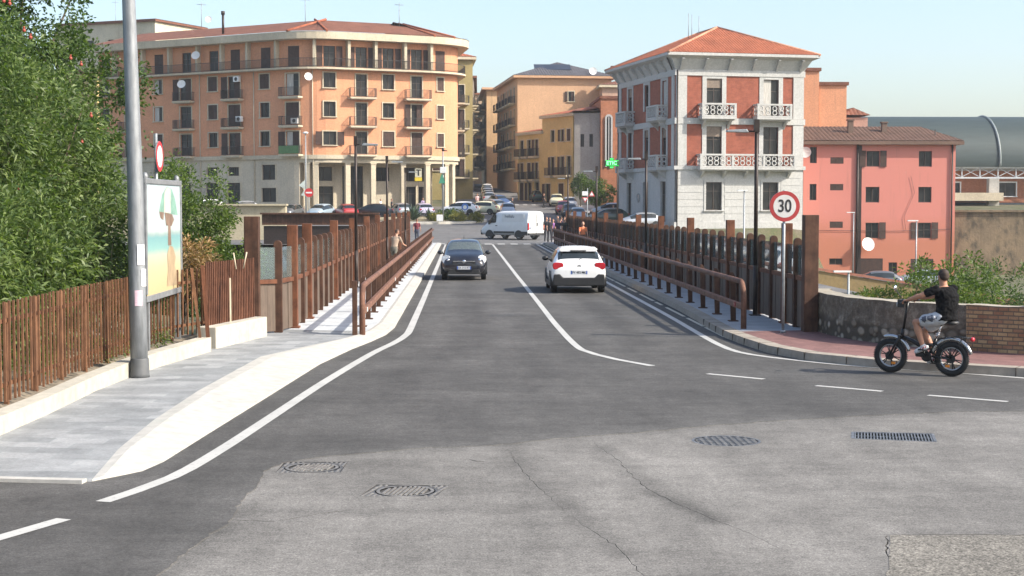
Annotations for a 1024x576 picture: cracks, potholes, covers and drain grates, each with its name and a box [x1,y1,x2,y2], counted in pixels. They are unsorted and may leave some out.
manhole cover [275,462,347,473]
crack [510,450,642,574]
crack [593,441,785,551]
manhole cover [692,435,761,446]
manhole cover [360,485,448,496]
drain grate [851,432,937,442]
